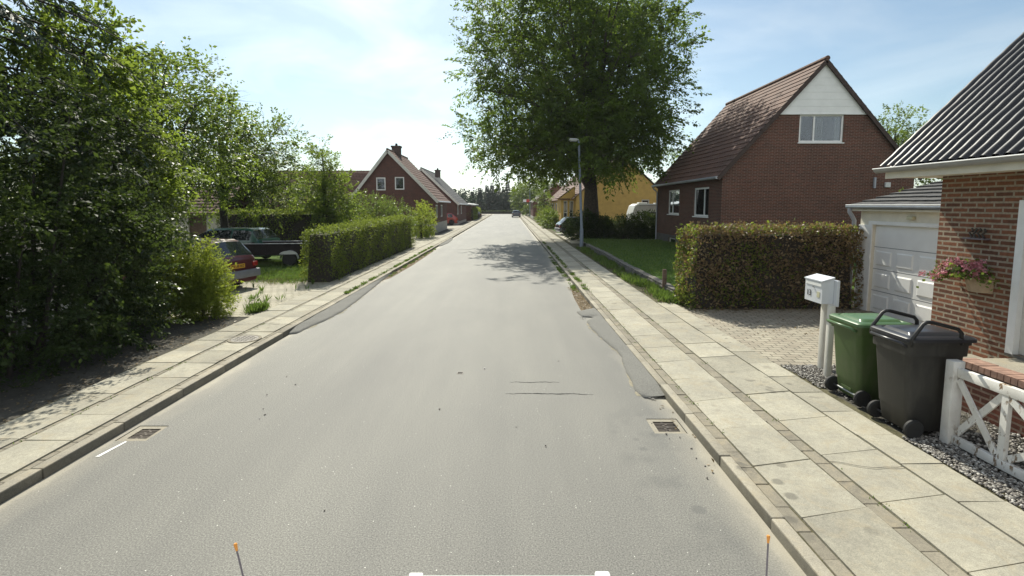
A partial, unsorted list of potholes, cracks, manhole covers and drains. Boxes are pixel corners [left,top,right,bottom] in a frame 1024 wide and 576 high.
drain grate [117,426,168,441]
manhole cover [227,335,262,343]
drain grate [646,419,686,433]
